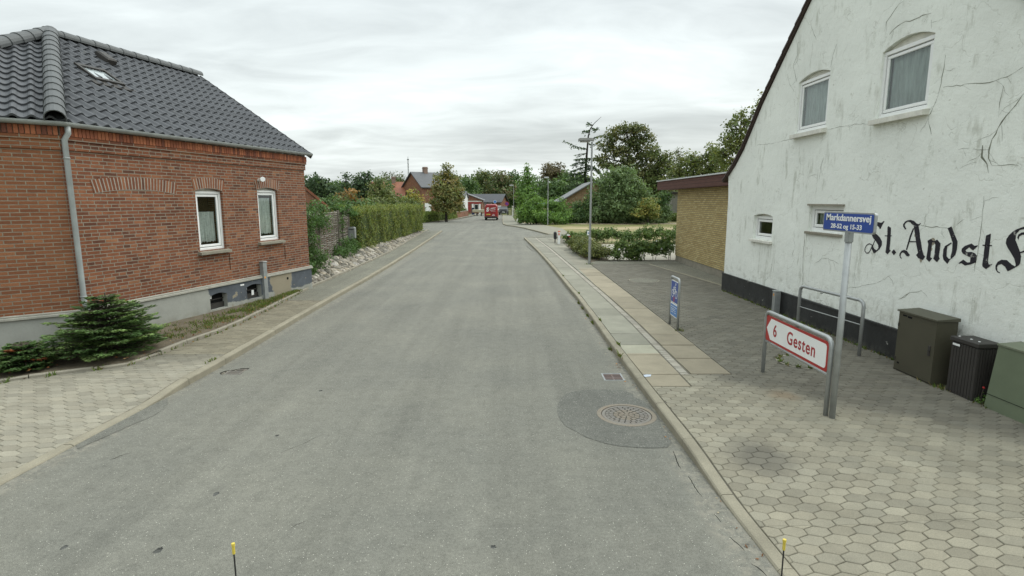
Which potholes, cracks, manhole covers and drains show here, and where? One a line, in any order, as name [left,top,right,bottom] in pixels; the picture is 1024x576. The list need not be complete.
drain grate [601,373,625,381]
crack [673,451,767,576]
manhole cover [597,404,657,426]
